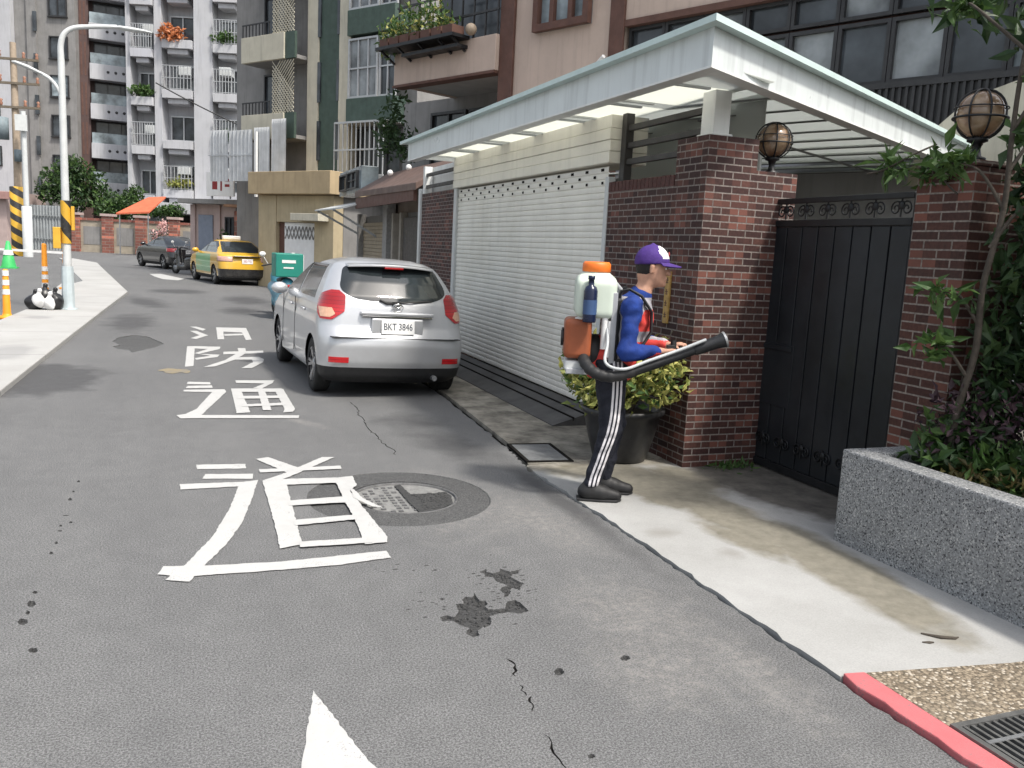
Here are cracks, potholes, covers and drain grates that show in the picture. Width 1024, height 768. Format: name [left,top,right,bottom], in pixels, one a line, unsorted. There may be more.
pothole [406,592,529,637]
pothole [467,567,536,599]
manhole cover [307,472,491,526]
drain grate [950,709,1024,768]
crack [507,659,566,768]
